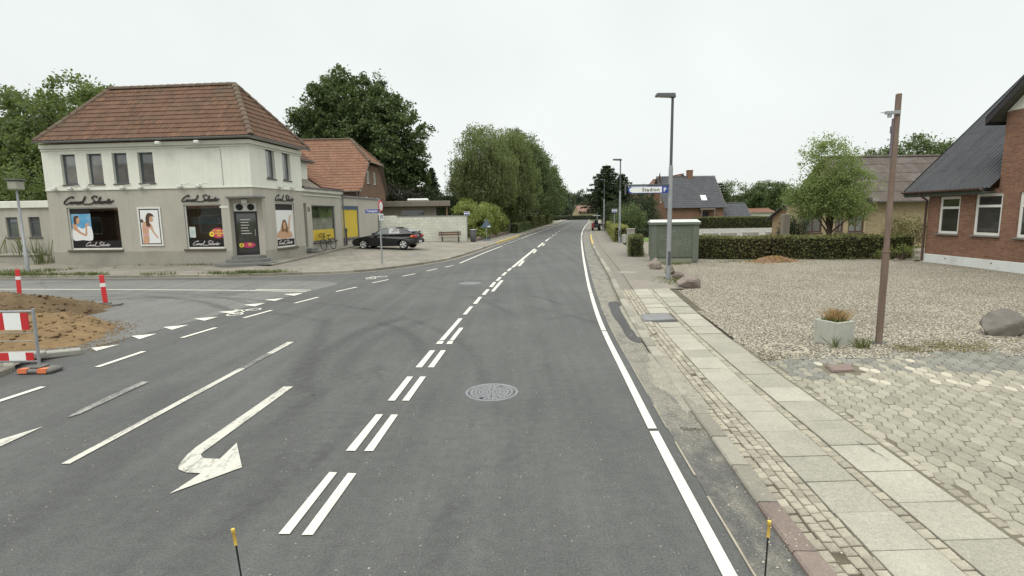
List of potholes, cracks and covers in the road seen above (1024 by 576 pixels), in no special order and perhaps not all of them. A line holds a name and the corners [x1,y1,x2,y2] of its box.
manhole cover [640,313,675,322]
manhole cover [465,383,518,401]
